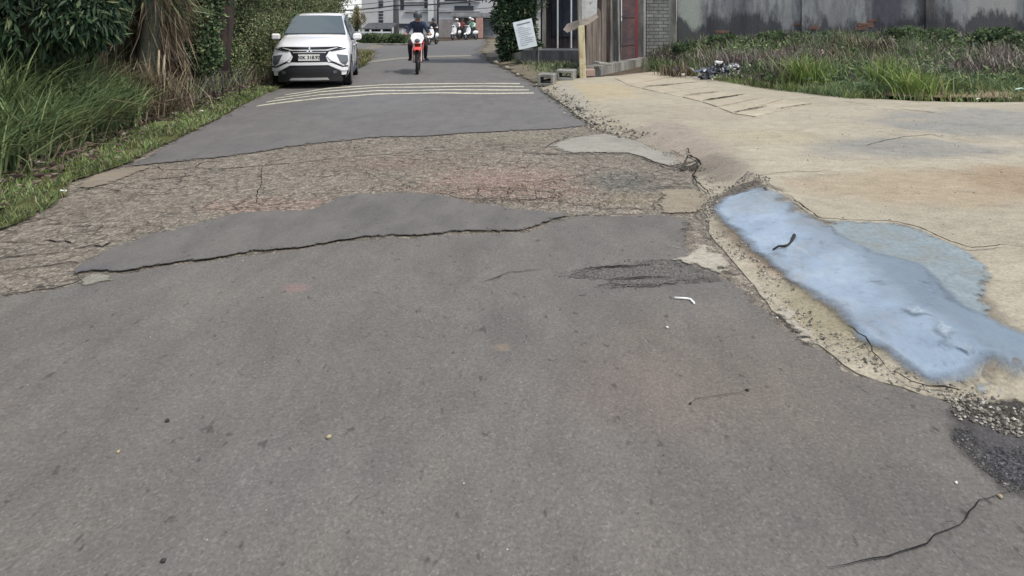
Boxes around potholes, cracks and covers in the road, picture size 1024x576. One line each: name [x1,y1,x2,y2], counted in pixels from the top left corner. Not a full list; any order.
crack [831,491,1011,567]
pothole [569,259,721,288]
crack [848,325,961,390]
crack [318,89,711,244]
